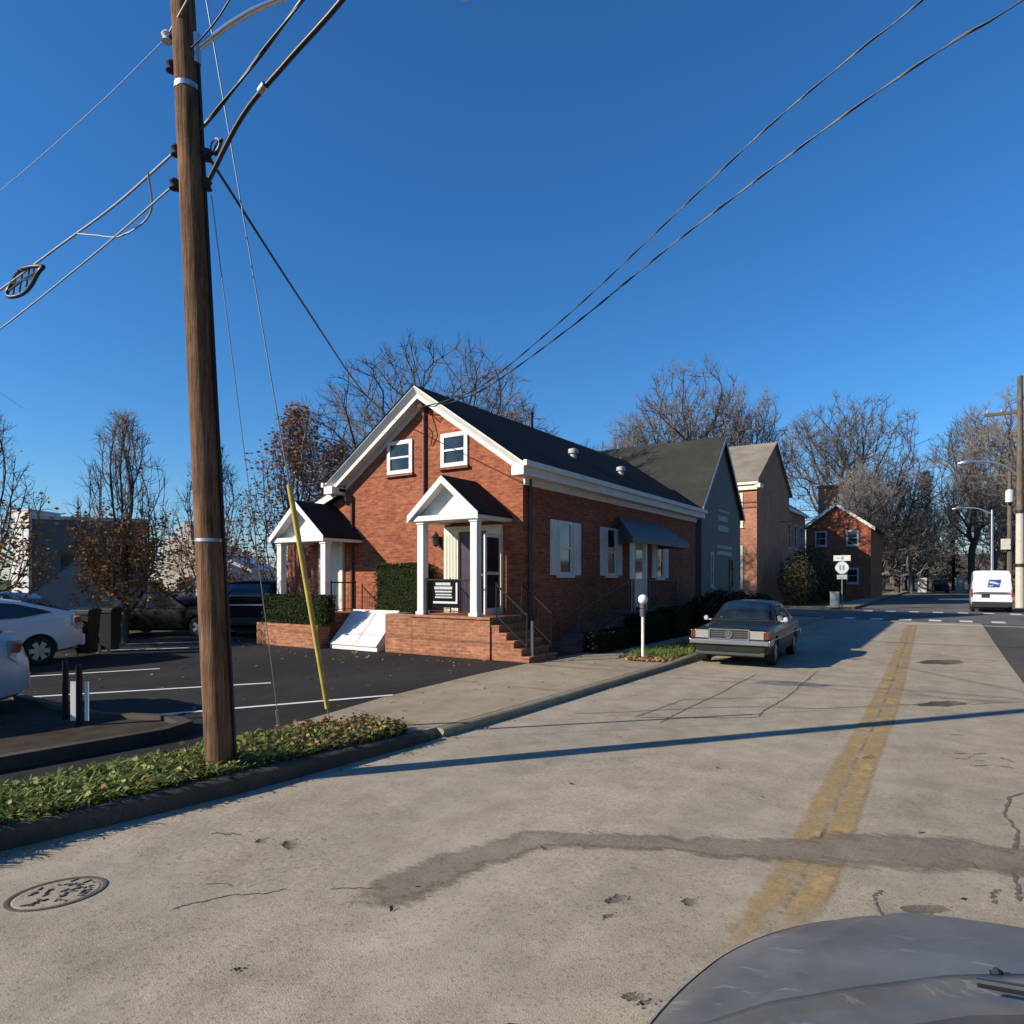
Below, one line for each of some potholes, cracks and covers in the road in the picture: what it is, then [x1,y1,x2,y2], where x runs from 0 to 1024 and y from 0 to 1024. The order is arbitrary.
crack [989,792,1024,904]
pothole [680,896,698,907]
pothole [602,892,630,904]
crack [173,883,372,909]
crack [872,890,884,915]
pothole [620,991,651,1003]
manhole cover [3,876,108,912]
pothole [279,839,300,851]
